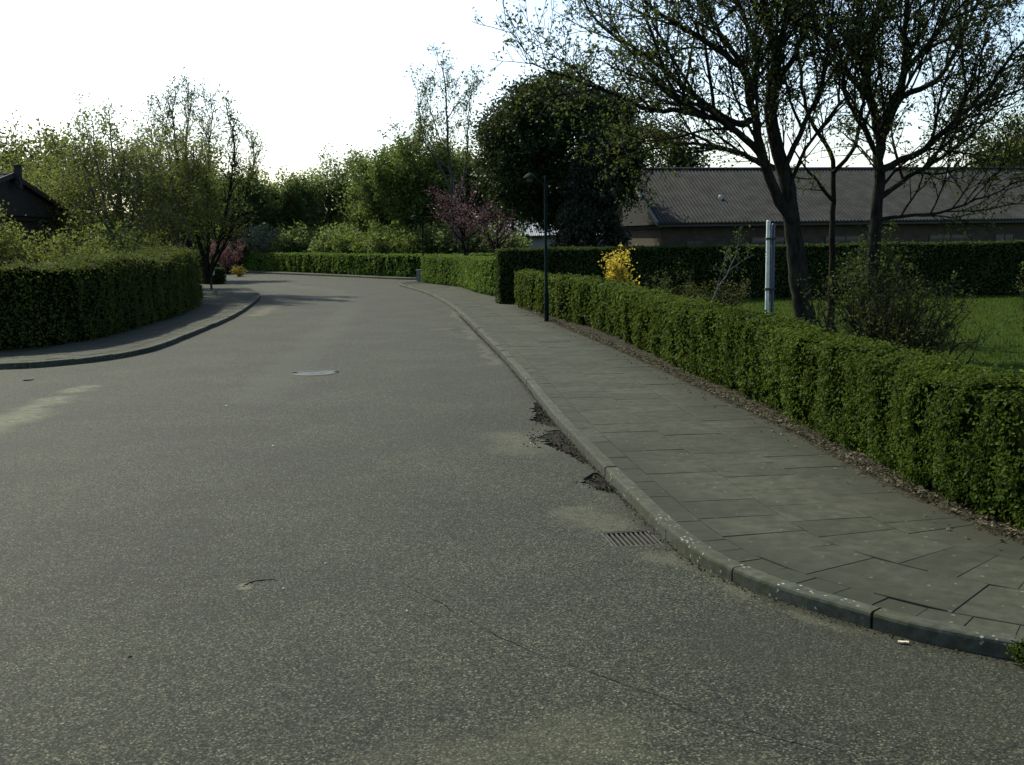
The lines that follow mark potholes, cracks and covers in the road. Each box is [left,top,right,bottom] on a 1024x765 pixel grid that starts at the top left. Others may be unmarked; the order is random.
crack [402,582,854,760]
drain grate [601,530,663,547]
pothole [536,430,589,464]
pothole [580,473,615,493]
pothole [529,403,556,427]
